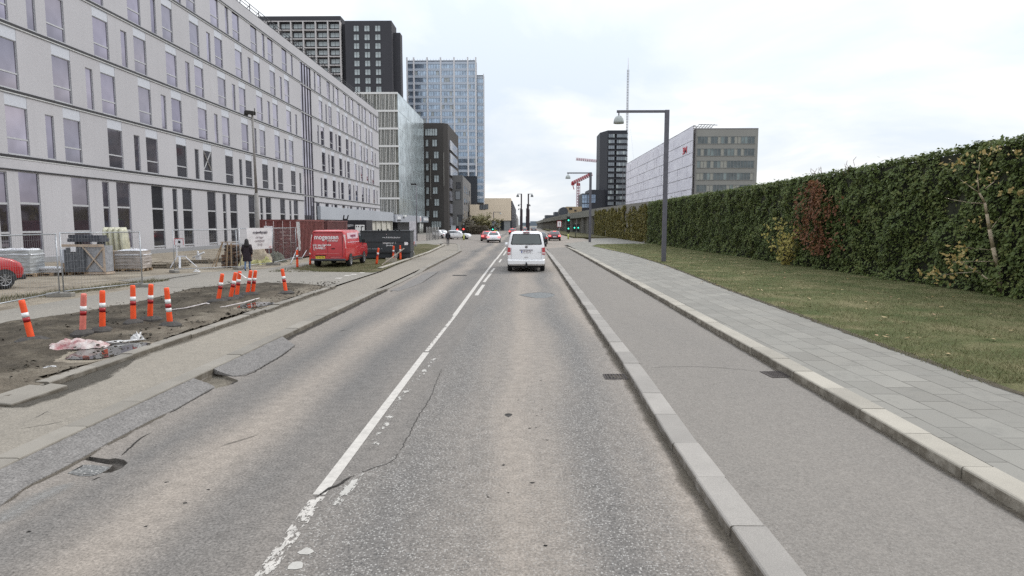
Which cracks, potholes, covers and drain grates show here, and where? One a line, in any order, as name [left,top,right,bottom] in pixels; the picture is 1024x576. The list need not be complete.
crack [319,475,354,495]
crack [5,389,212,503]
pothole [202,374,238,388]
pothole [84,457,127,473]
